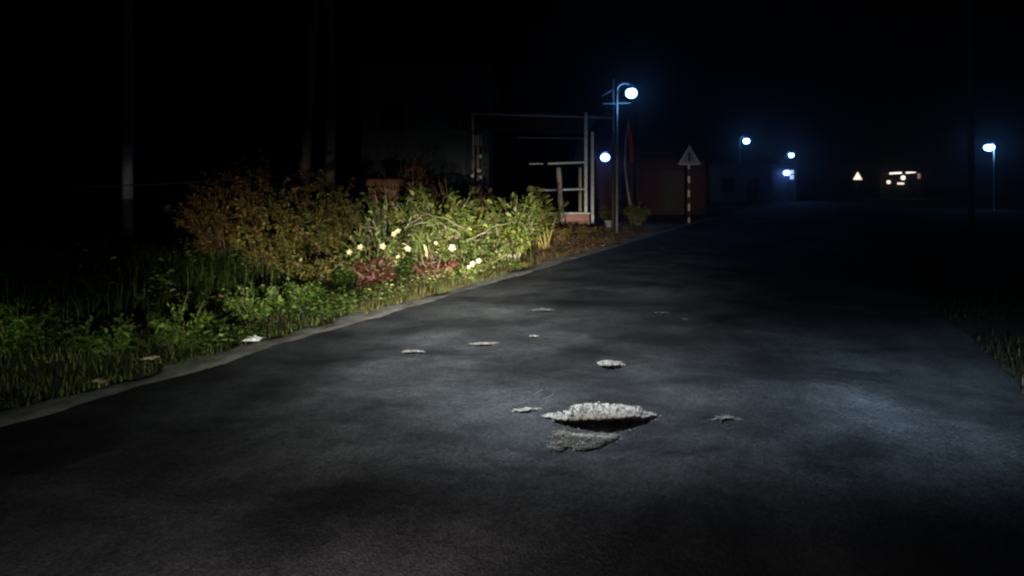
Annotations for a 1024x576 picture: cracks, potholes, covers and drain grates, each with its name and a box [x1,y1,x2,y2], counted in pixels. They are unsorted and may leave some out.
pothole [543,429,623,454]
pothole [596,360,625,370]
pothole [708,414,743,424]
pothole [542,401,662,433]
